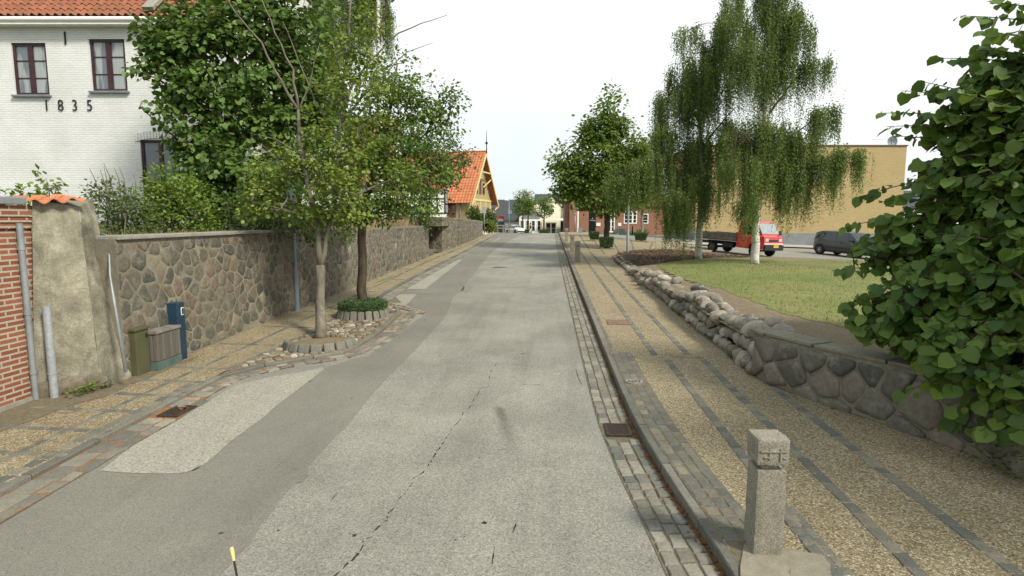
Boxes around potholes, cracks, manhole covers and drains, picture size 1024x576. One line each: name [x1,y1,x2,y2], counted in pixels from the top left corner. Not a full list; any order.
drain grate [604,423,632,437]
drain grate [156,405,197,418]
crack [334,365,496,576]
